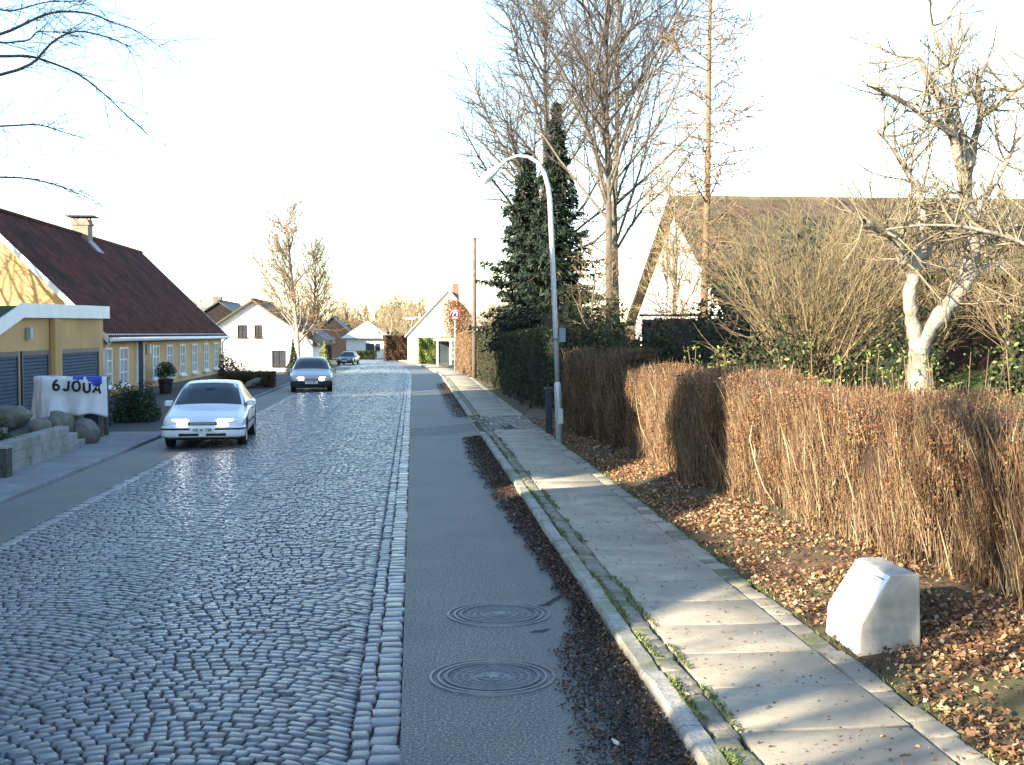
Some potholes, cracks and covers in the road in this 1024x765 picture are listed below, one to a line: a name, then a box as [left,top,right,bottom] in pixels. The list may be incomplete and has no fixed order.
manhole cover [447,602,551,627]
manhole cover [429,658,556,696]
crack [538,595,564,606]
